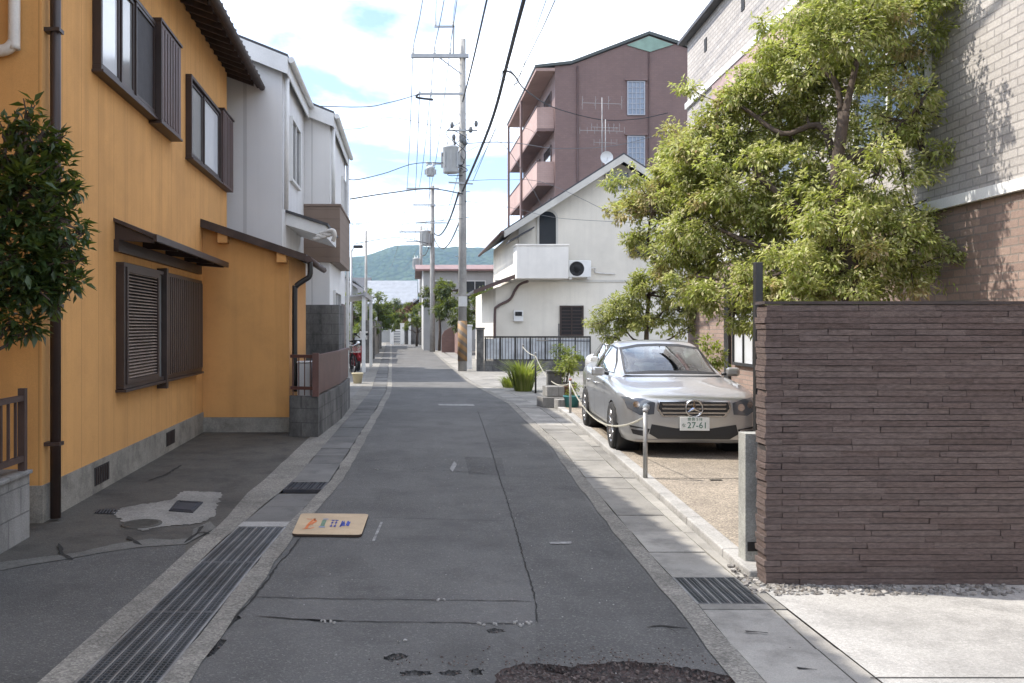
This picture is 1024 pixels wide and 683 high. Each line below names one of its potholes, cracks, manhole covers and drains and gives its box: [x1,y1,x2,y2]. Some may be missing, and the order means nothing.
drain grate [148,562,257,612]
crack [184,526,210,543]
pothole [495,661,735,683]
drain grate [200,527,285,563]
drain grate [74,612,217,683]
drain grate [672,577,767,604]
crack [57,543,73,560]
pothole [383,653,408,662]
manhole cover [169,500,203,513]
manhole cover [121,519,162,529]
drain grate [283,479,331,494]
